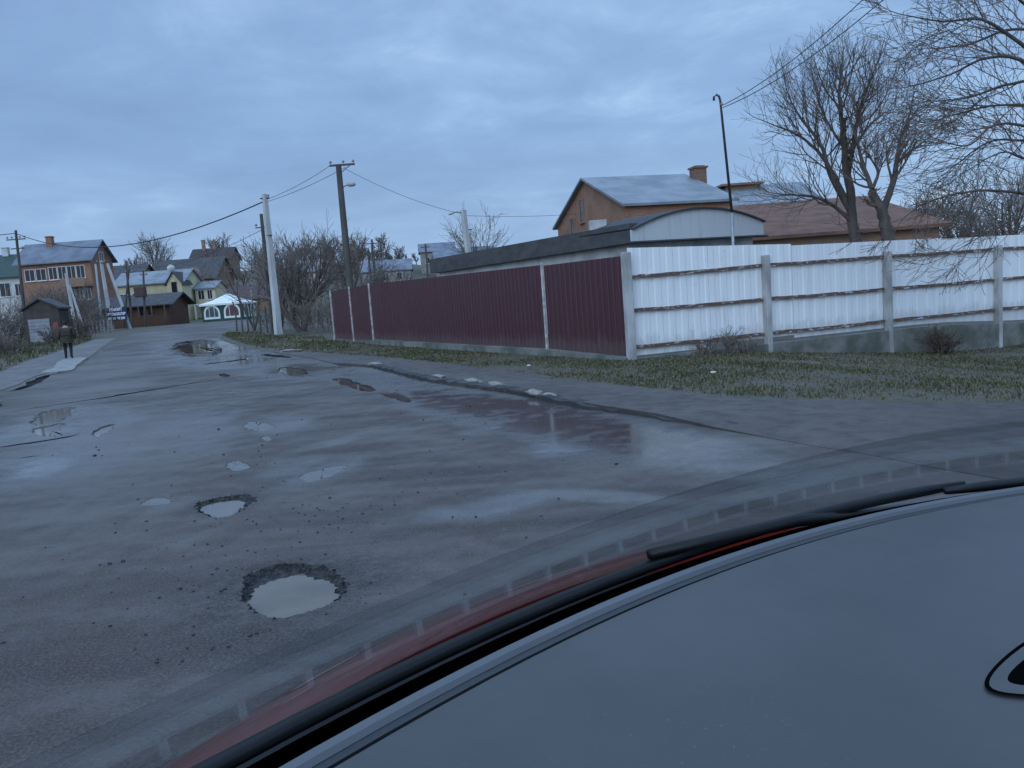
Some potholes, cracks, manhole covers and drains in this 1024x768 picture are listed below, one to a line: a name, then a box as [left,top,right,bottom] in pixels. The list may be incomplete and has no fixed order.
pothole [31,423,66,436]
pothole [139,497,172,506]
pothole [278,366,309,376]
pothole [195,494,257,518]
pothole [242,421,276,431]
pothole [298,465,348,483]
pothole [91,424,115,437]
pothole [28,407,77,425]
pothole [332,378,376,392]
pothole [168,339,222,356]
pothole [240,563,351,620]
pothole [225,460,253,471]
